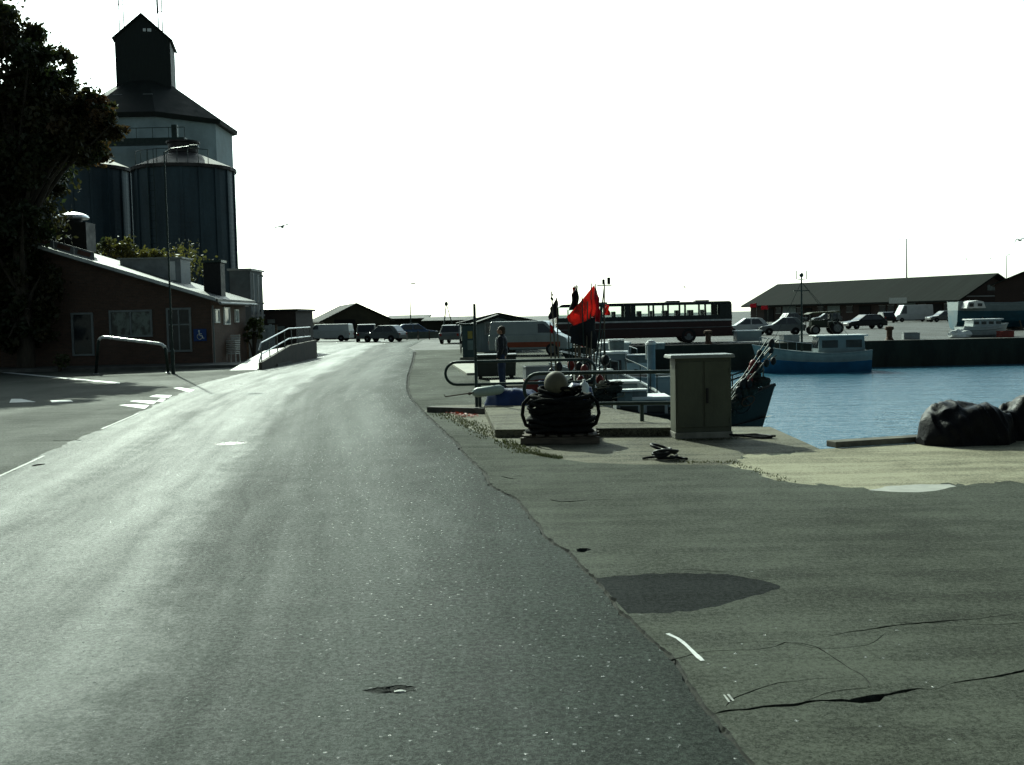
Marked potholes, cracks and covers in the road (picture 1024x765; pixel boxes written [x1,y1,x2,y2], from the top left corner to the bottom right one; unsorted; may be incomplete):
pothole [362,685,416,694]
crack [671,614,1024,714]
